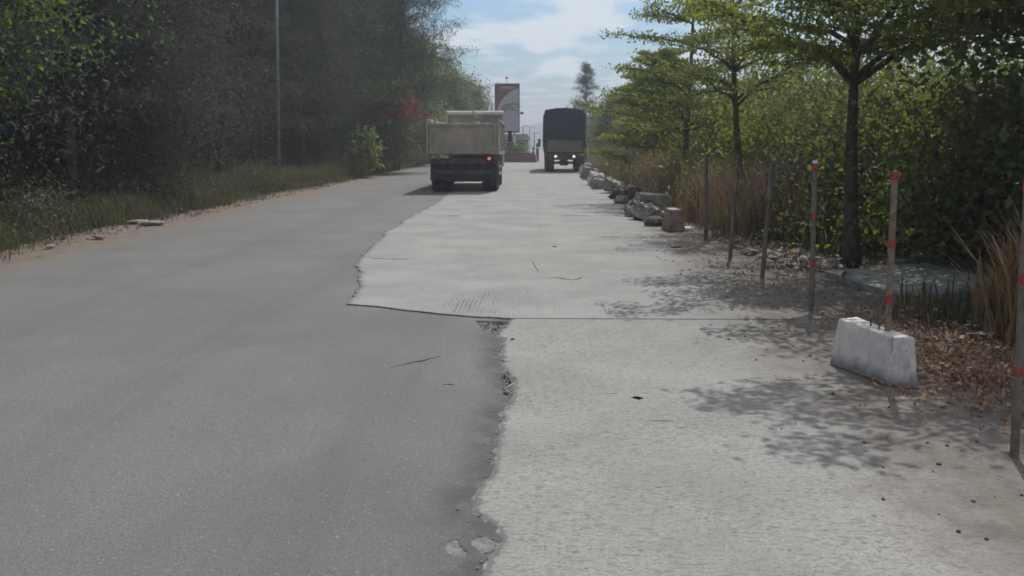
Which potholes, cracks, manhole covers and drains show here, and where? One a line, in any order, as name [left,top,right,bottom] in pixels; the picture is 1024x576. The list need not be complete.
pothole [444,538,468,557]
pothole [471,535,496,553]
pothole [500,374,512,395]
pothole [476,321,508,334]
